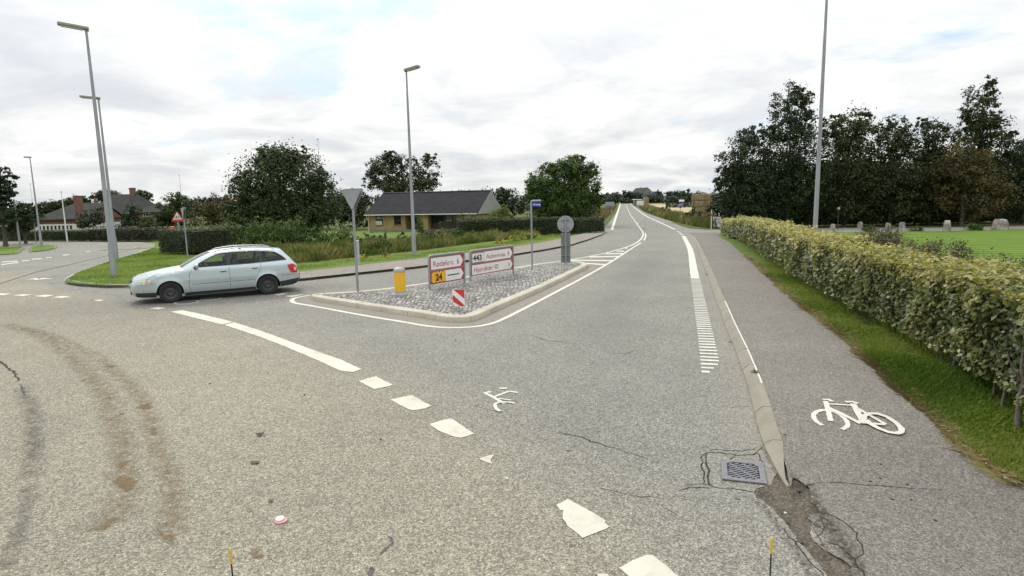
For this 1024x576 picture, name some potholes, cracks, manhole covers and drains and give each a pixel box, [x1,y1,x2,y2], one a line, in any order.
crack [803,482,988,494]
crack [558,420,645,458]
crack [367,536,393,576]
pothole [754,473,853,576]
crack [681,447,763,500]
crack [0,361,25,396]
drain grate [721,458,767,485]
